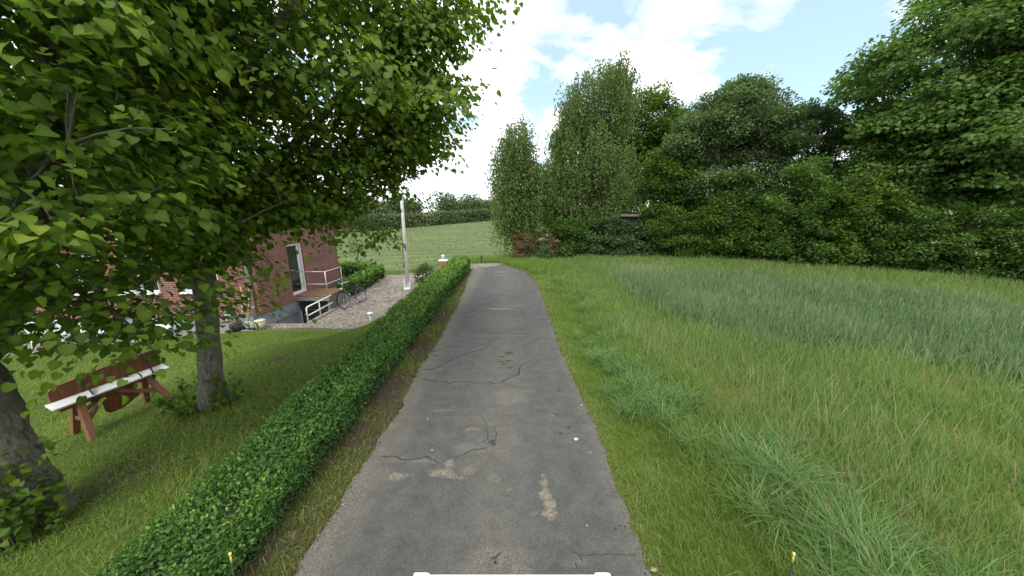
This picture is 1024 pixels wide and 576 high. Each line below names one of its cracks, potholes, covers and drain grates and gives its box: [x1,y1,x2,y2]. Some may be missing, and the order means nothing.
crack [381,410,512,463]
crack [422,331,548,385]
crack [571,551,635,569]
